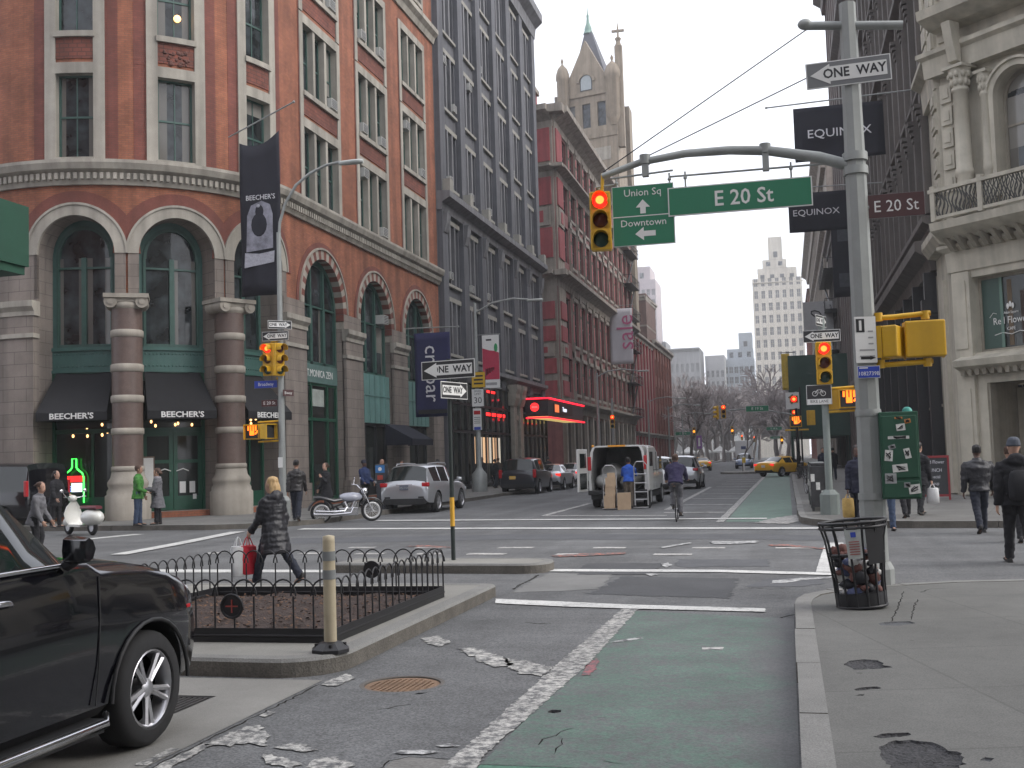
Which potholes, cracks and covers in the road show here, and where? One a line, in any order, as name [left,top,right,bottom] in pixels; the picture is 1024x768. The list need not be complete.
pothole [844,659,891,670]
manhole cover [359,676,445,693]
crack [890,589,929,622]
drain grate [174,696,213,714]
pothole [879,740,965,768]
